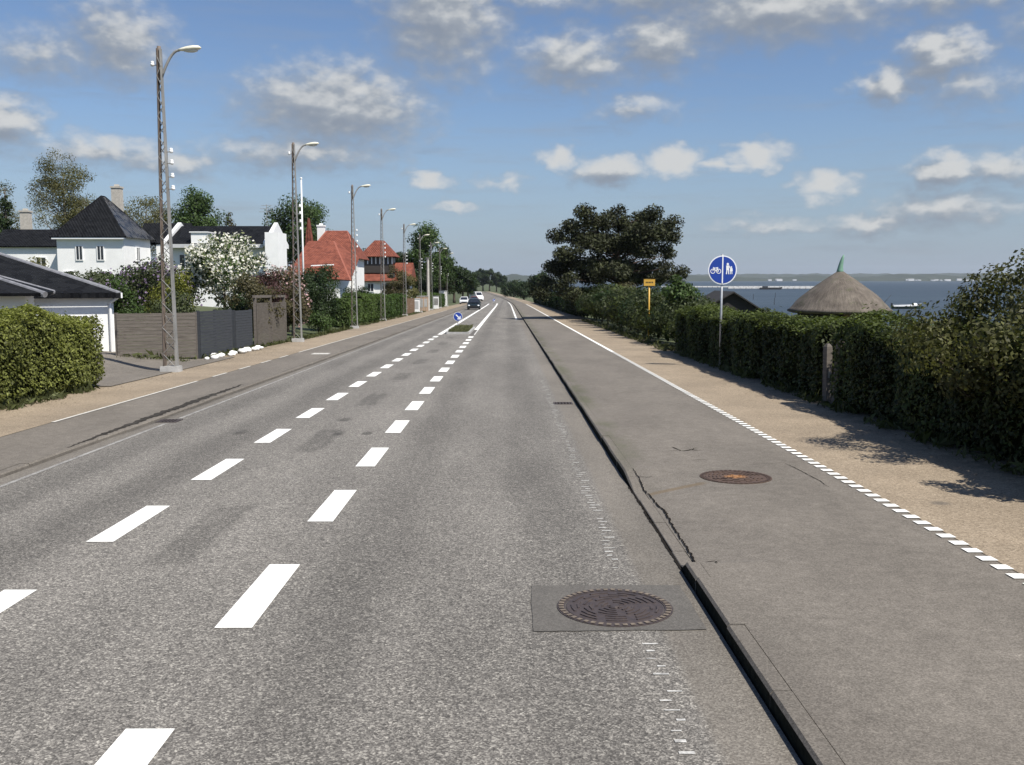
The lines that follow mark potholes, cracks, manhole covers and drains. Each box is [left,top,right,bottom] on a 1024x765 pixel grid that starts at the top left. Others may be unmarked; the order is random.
manhole cover [700,470,772,484]
manhole cover [557,588,673,627]
crack [628,468,718,571]
